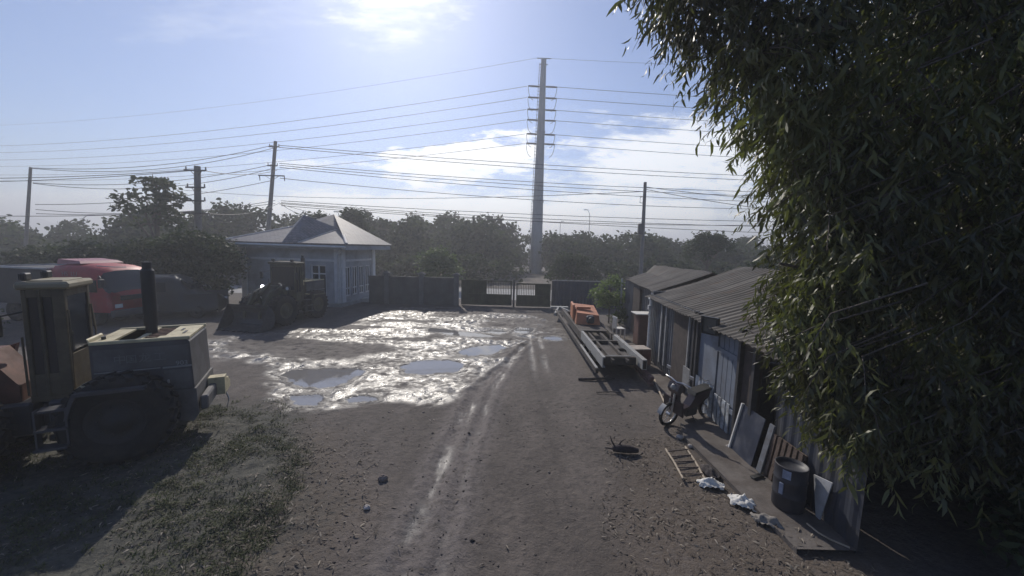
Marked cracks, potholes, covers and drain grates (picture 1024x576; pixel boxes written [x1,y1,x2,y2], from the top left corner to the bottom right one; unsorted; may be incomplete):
pothole [336,393,384,405]
pothole [451,344,511,357]
pothole [393,357,472,377]
pothole [270,366,375,391]
